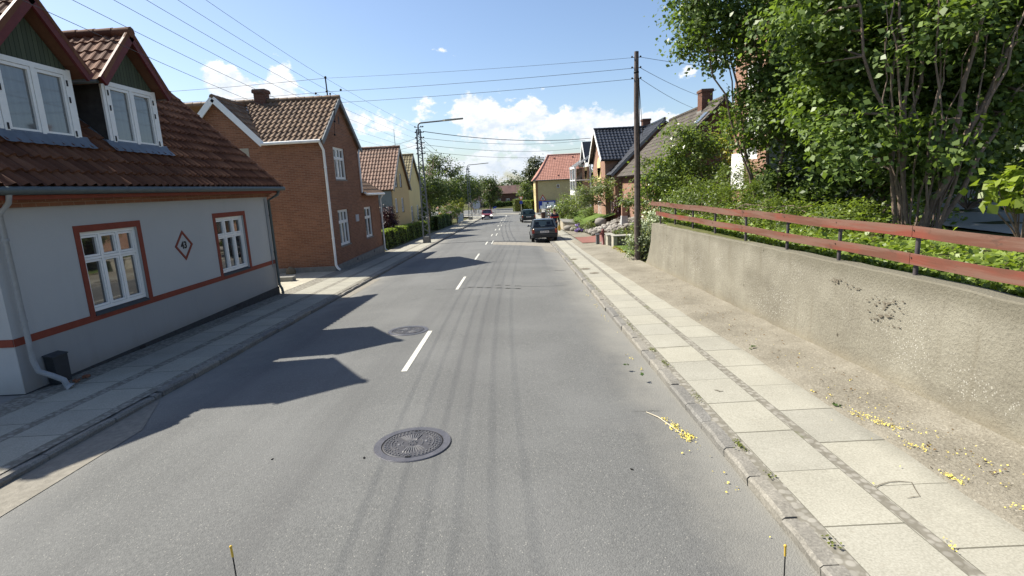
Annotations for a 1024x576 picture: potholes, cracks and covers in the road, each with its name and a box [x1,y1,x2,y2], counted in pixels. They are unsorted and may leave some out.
manhole cover [388,326,429,336]
manhole cover [373,427,451,463]
